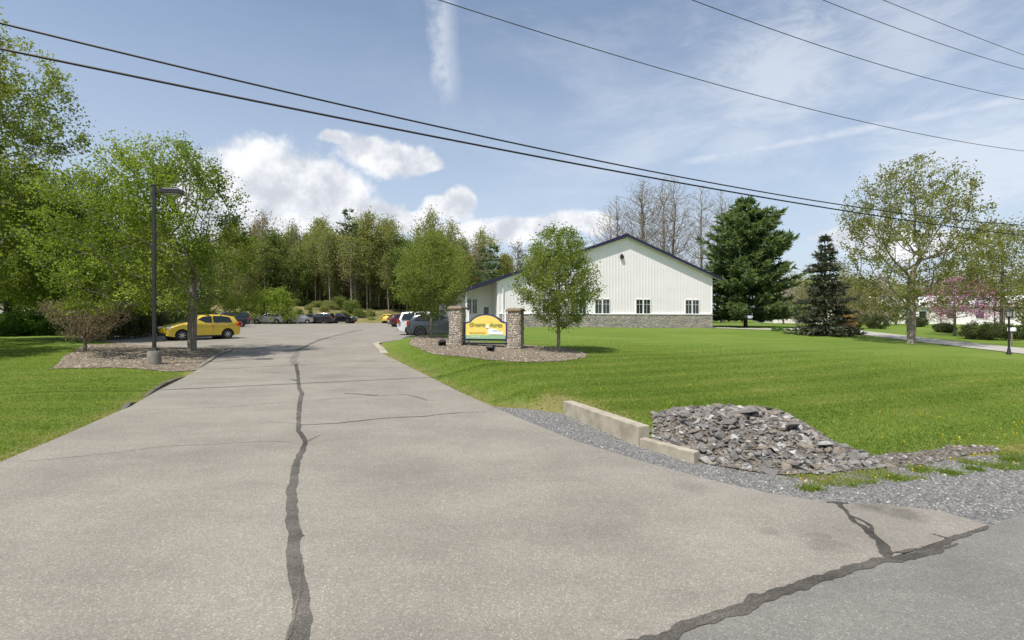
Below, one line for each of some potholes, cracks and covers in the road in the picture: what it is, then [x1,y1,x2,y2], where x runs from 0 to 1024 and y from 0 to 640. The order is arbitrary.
crack [33,393,485,461]
